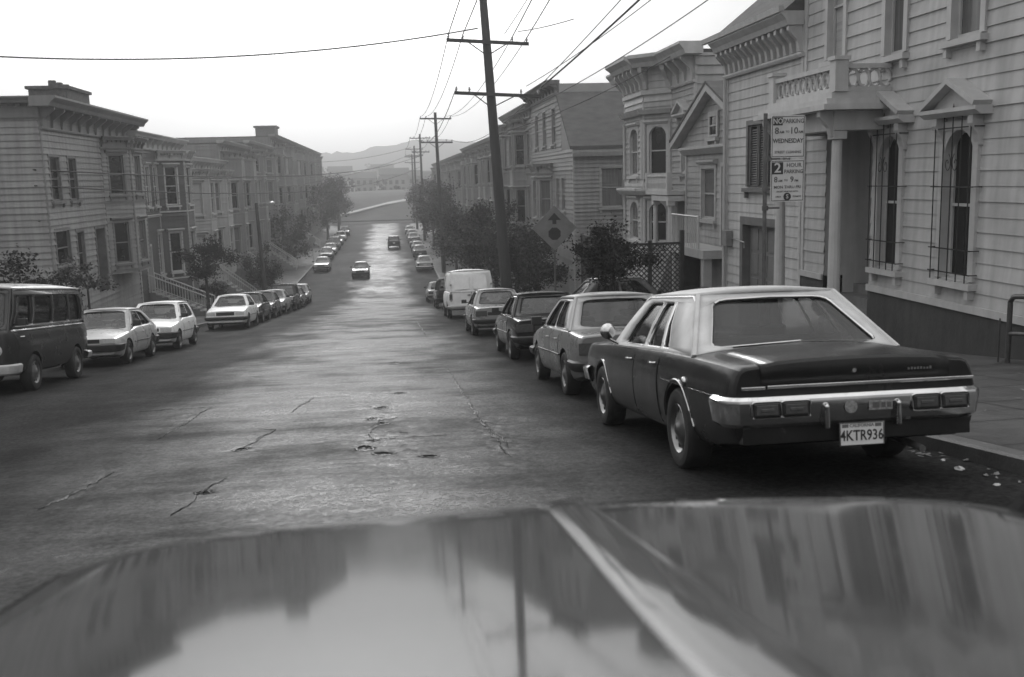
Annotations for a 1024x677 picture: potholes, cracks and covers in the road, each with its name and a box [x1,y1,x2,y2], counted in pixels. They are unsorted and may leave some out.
crack [243,398,313,448]
crack [171,478,225,515]
crack [361,417,440,442]
